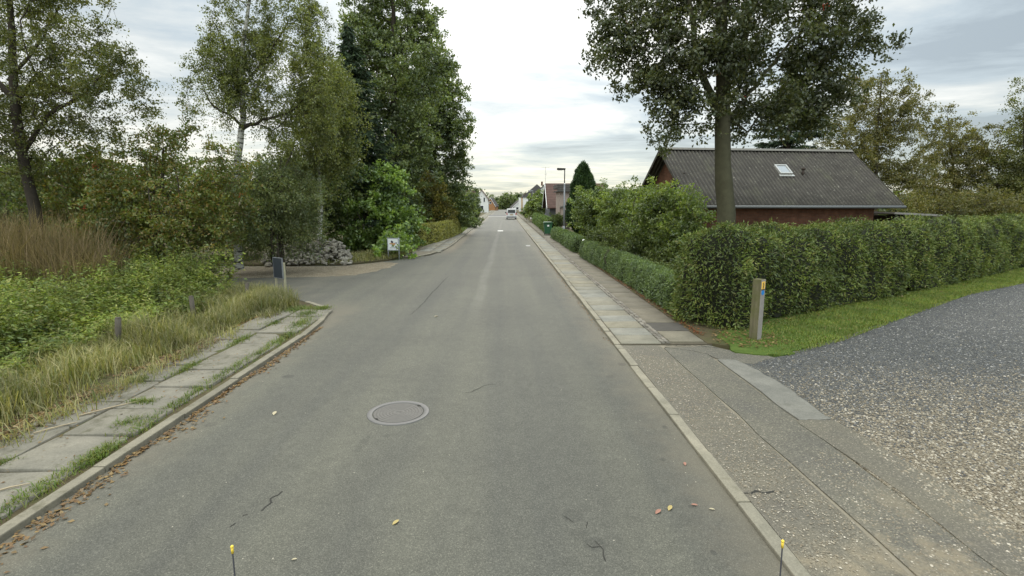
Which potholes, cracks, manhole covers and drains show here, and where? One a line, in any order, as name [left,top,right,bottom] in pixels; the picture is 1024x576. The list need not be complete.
manhole cover [367,401,429,426]
